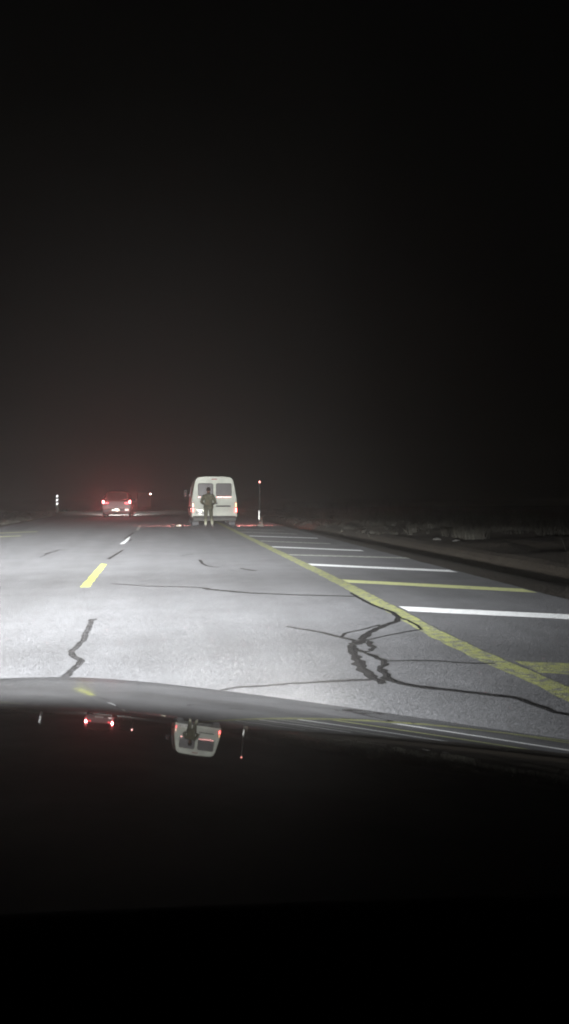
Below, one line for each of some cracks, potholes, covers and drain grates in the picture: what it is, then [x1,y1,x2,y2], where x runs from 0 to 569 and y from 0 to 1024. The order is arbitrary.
crack [111,583,355,597]
